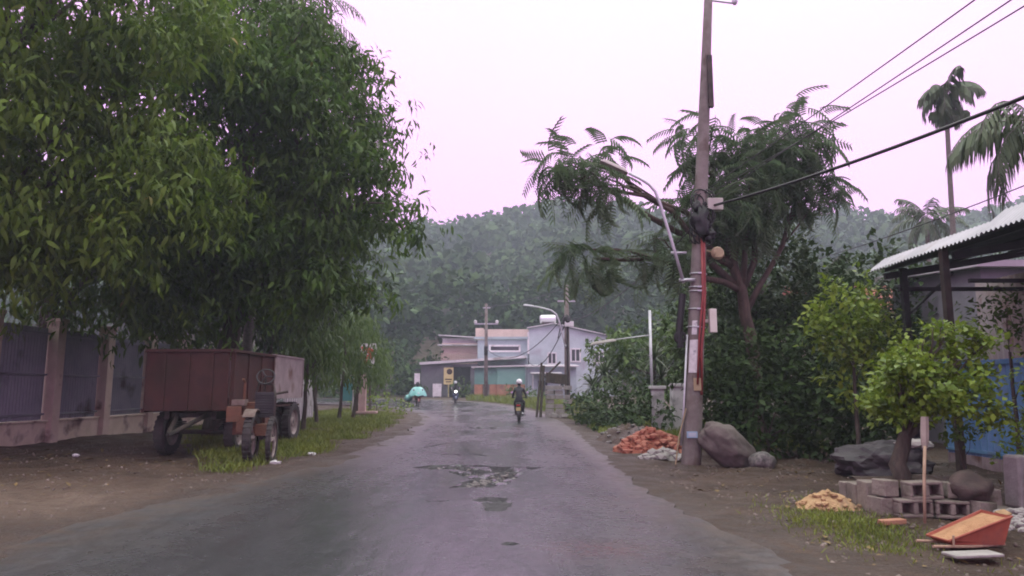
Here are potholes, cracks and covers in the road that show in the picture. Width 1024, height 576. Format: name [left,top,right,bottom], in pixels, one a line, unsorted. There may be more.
pothole [412,465,543,488]
pothole [466,497,513,512]
